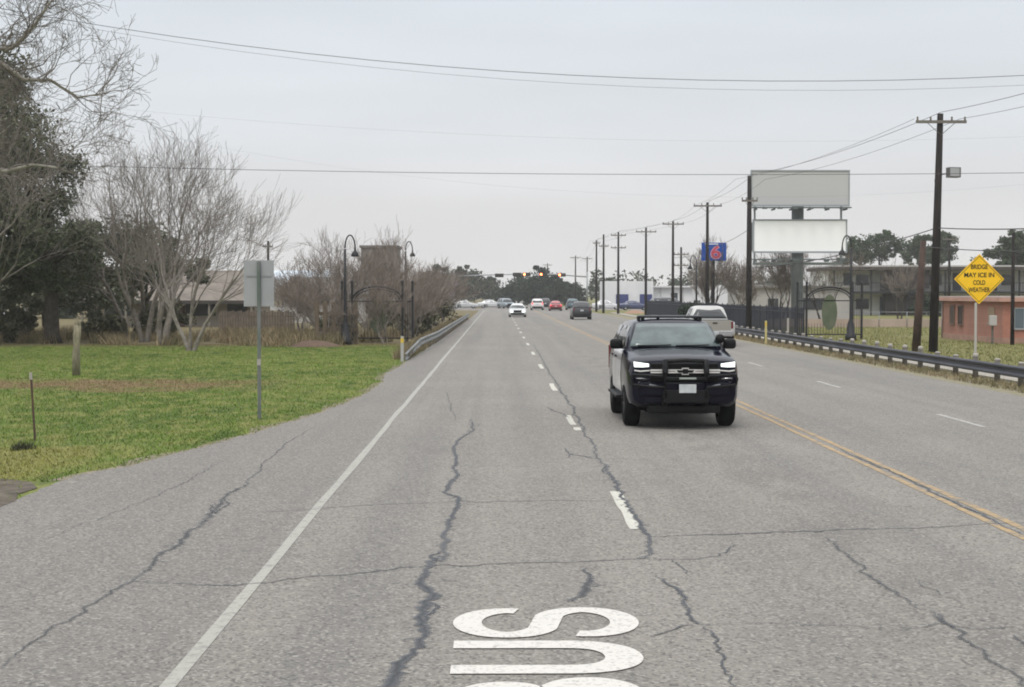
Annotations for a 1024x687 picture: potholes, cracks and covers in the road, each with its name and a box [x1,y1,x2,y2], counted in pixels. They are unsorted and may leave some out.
crack [140,346,1022,602]
crack [650,576,875,687]
